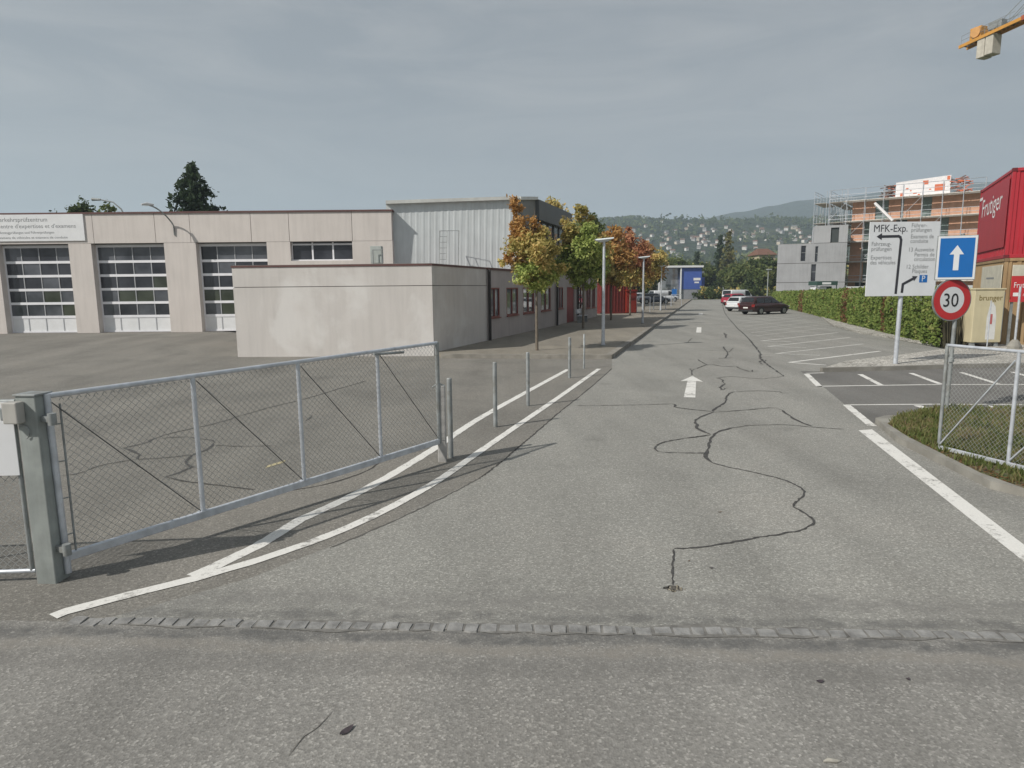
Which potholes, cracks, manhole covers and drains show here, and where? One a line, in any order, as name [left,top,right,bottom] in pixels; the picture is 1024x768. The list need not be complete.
crack [576,303,836,585]
crack [60,381,364,489]
